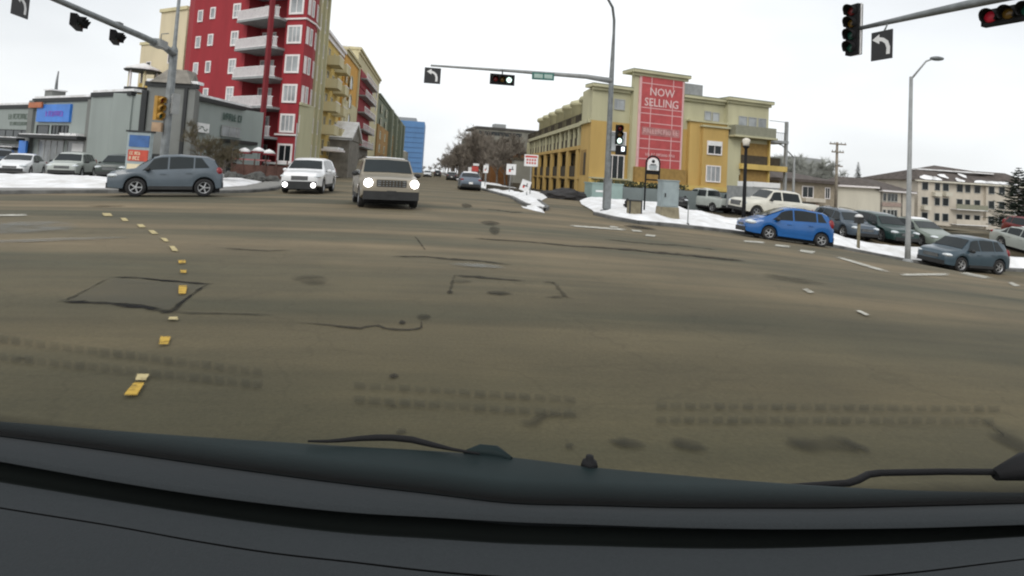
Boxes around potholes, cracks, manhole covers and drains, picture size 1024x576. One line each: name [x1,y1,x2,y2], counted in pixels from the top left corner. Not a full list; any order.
crack [400,241,511,282]
